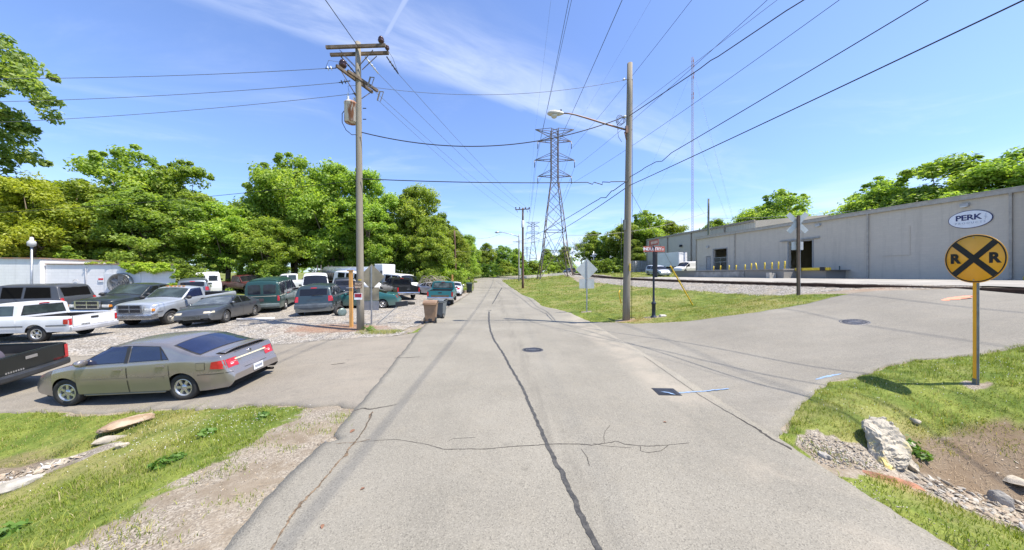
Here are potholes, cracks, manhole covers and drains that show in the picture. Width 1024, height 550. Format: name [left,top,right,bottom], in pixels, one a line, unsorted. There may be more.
utility cover [652,388,682,396]
crack [270,404,684,550]
